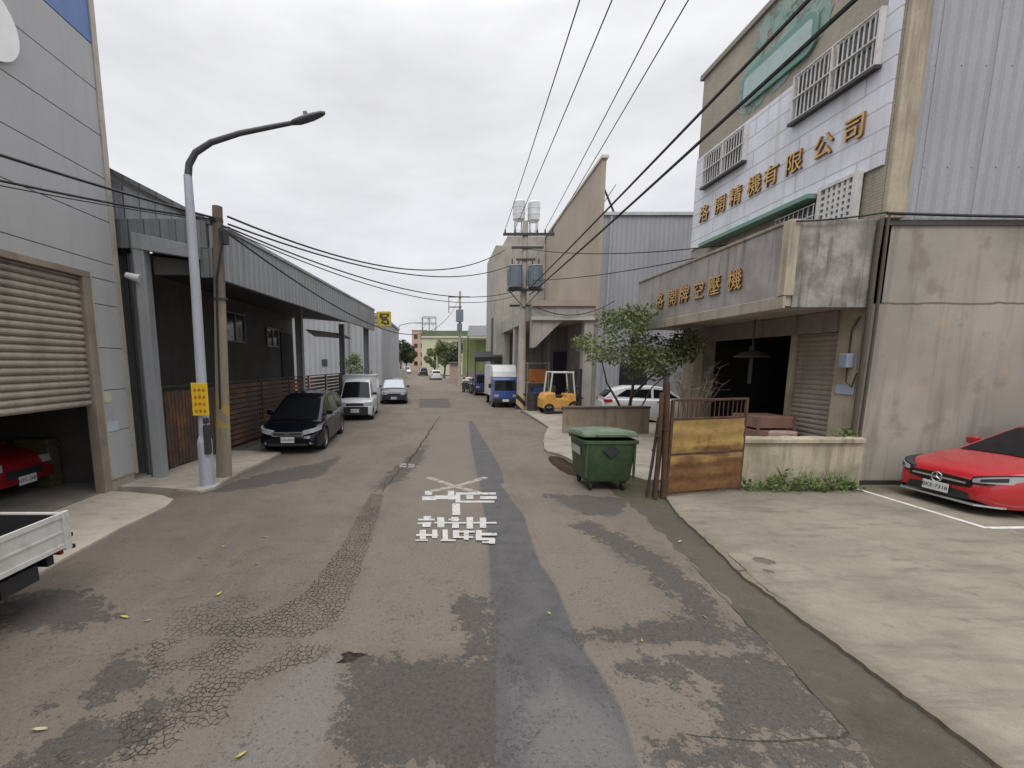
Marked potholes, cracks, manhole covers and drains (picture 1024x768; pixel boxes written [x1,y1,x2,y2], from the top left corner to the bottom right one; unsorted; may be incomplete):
crack [44,494,383,765]
pothole [337,651,366,664]
